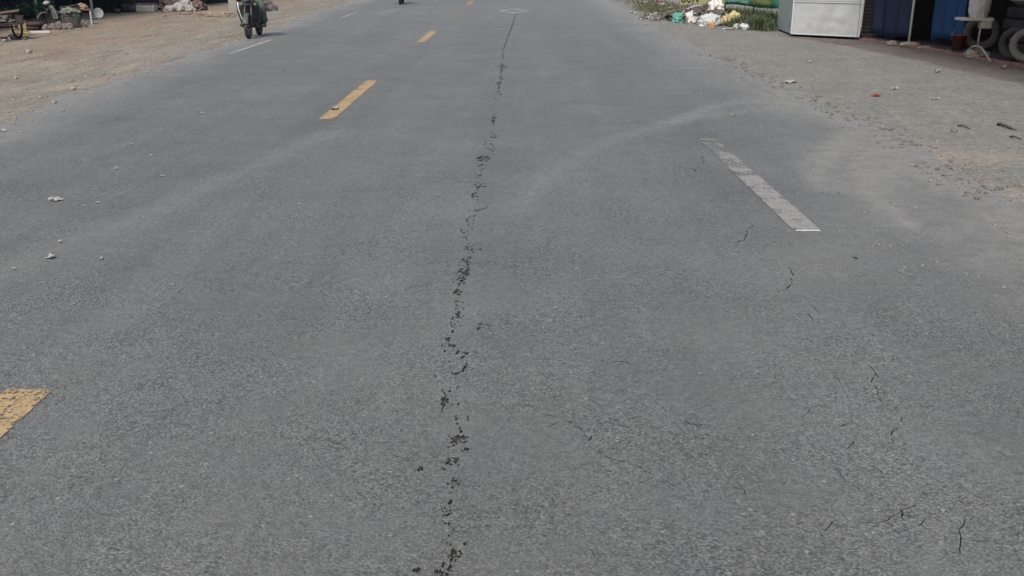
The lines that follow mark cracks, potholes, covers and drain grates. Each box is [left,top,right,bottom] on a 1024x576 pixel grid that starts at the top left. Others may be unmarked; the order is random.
crack [524,371,930,531]
crack [952,518,965,554]
